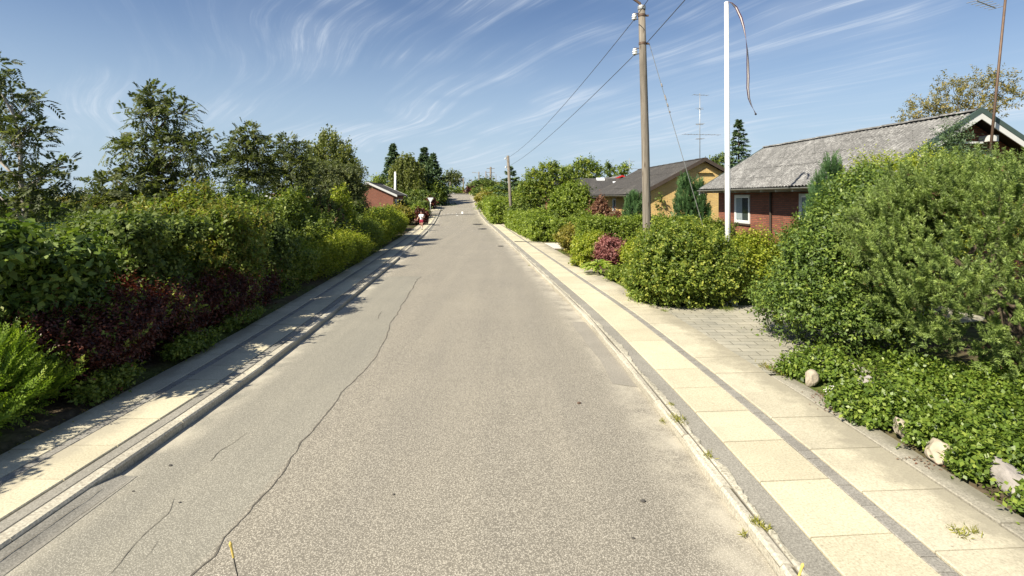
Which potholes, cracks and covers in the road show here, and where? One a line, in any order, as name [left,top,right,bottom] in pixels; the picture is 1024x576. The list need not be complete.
crack [110,276,421,576]
